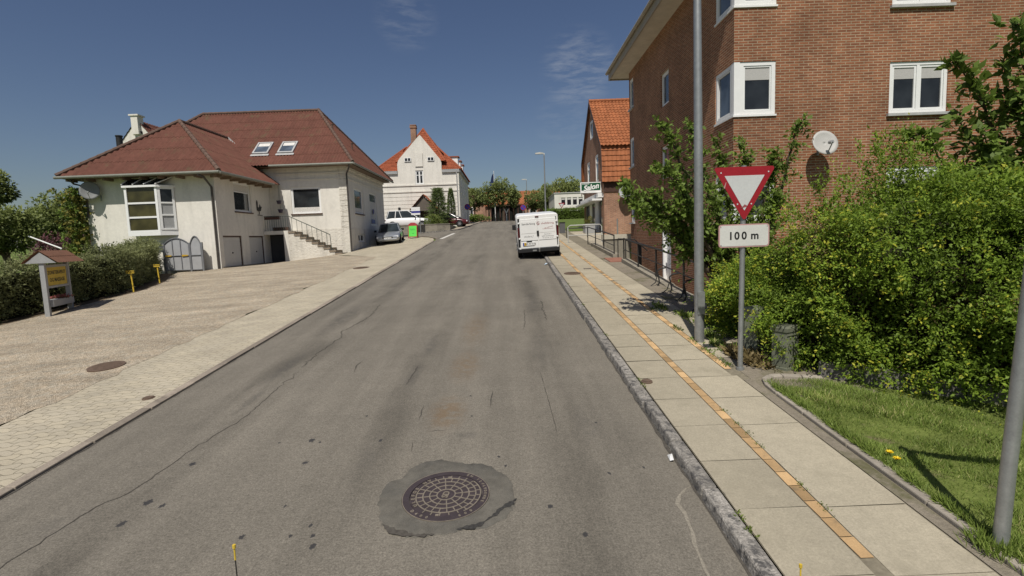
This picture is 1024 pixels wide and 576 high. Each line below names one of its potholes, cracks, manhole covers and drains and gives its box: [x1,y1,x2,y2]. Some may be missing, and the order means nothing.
manhole cover [402,471,490,522]
manhole cover [86,361,126,372]
